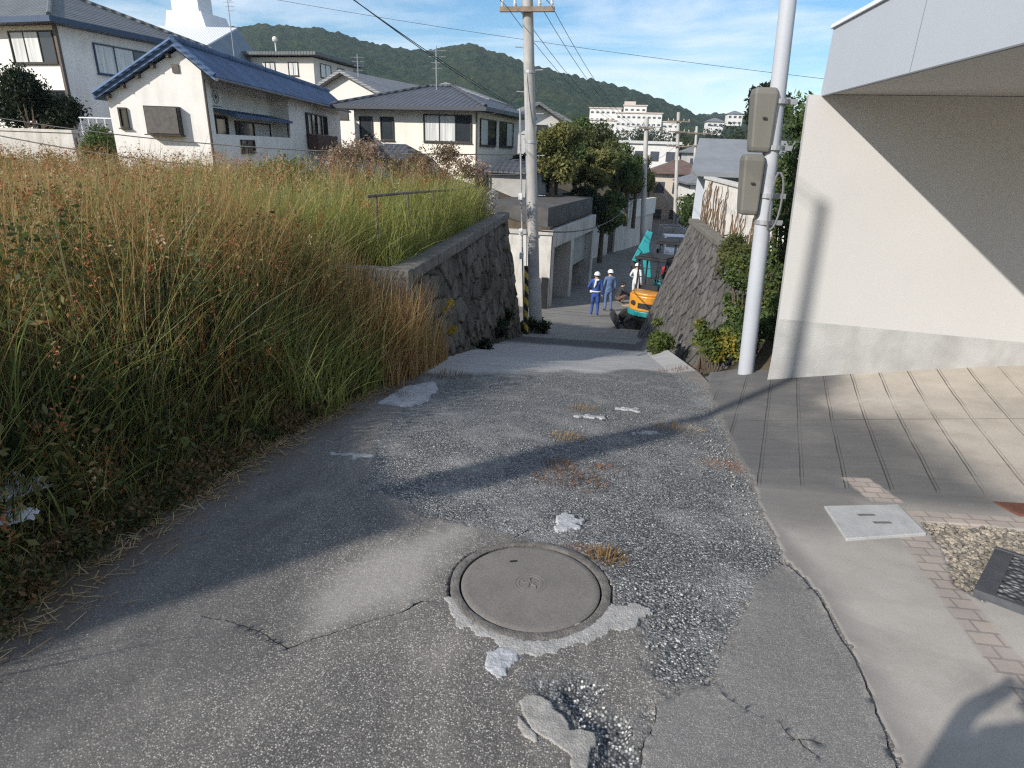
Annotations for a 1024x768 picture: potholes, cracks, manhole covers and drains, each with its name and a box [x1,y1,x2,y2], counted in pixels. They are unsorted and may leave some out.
utility cover [824,504,926,541]
crack [781,724,820,756]
crack [205,601,427,649]
pothole [557,678,642,768]
manhole cover [450,541,611,641]
